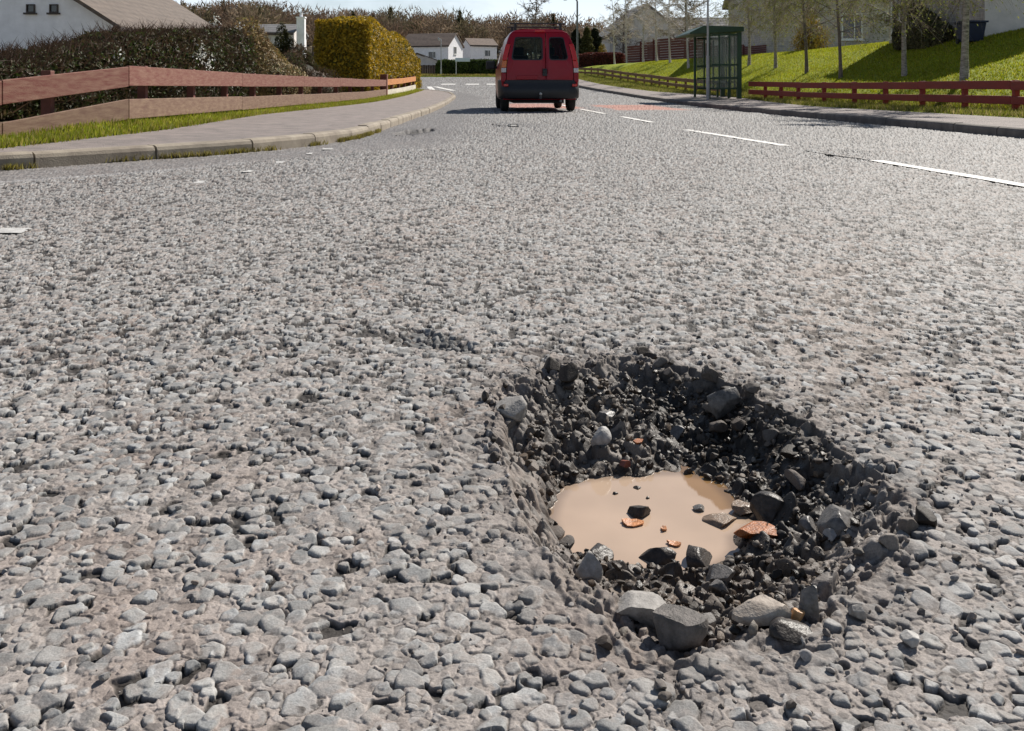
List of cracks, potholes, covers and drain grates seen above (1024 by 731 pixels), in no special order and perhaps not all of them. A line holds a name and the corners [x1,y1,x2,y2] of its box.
pothole [382,329,477,354]
pothole [492,353,923,676]
pothole [391,128,436,136]
